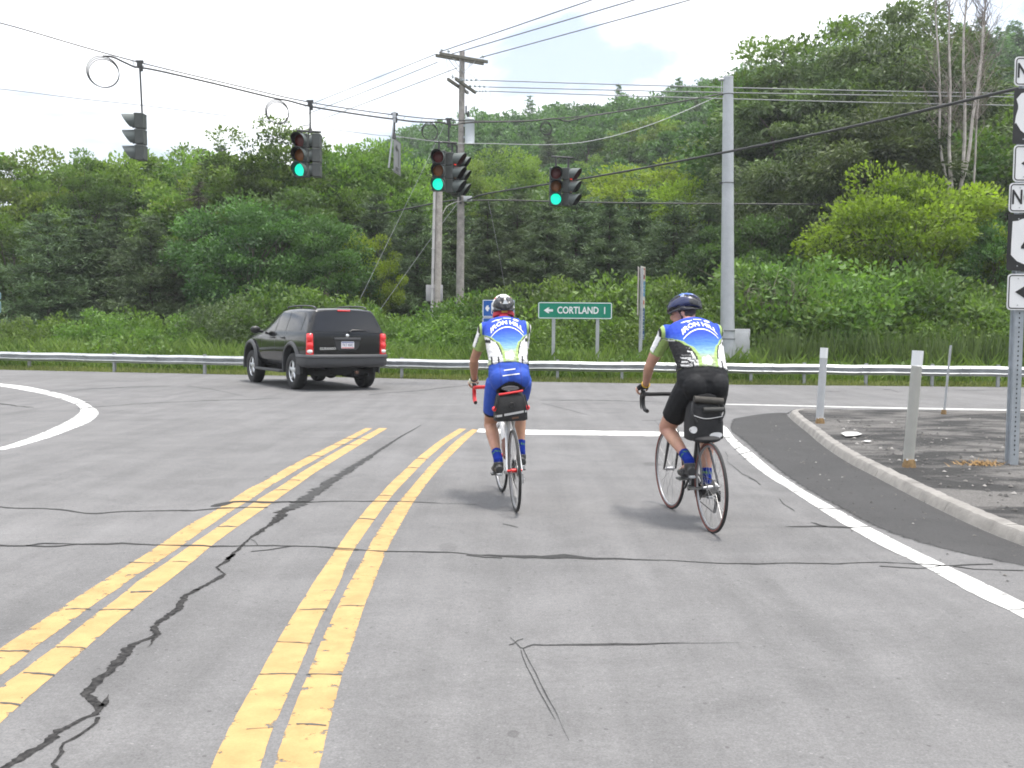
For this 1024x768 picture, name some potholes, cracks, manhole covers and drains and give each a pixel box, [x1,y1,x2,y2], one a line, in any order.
crack [0,425,1024,768]
